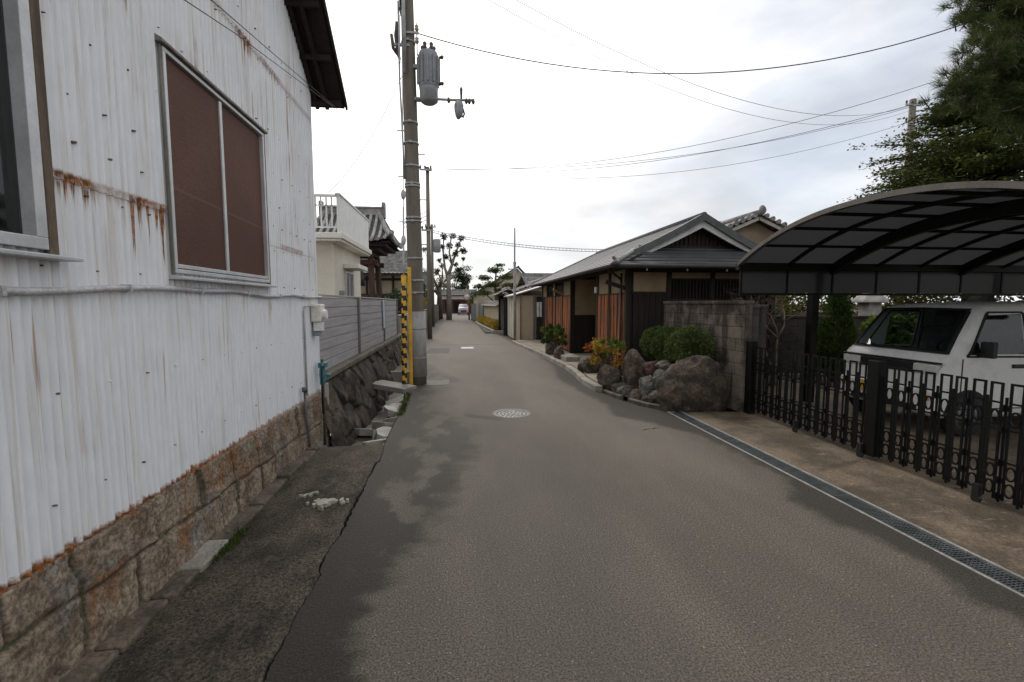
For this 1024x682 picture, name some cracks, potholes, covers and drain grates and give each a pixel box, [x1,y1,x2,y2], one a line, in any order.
manhole cover [492,409,531,418]
drain grate [667,411,1024,598]
crack [264,459,381,681]
